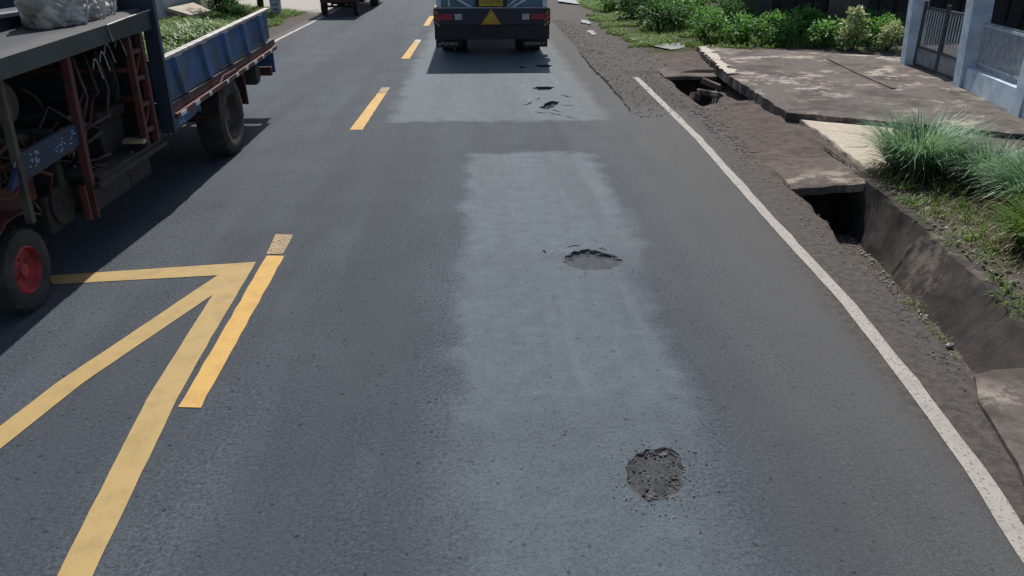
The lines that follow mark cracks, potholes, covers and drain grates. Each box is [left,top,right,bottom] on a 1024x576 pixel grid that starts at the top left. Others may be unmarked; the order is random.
pothole [626,447,684,503]
pothole [563,249,623,270]
